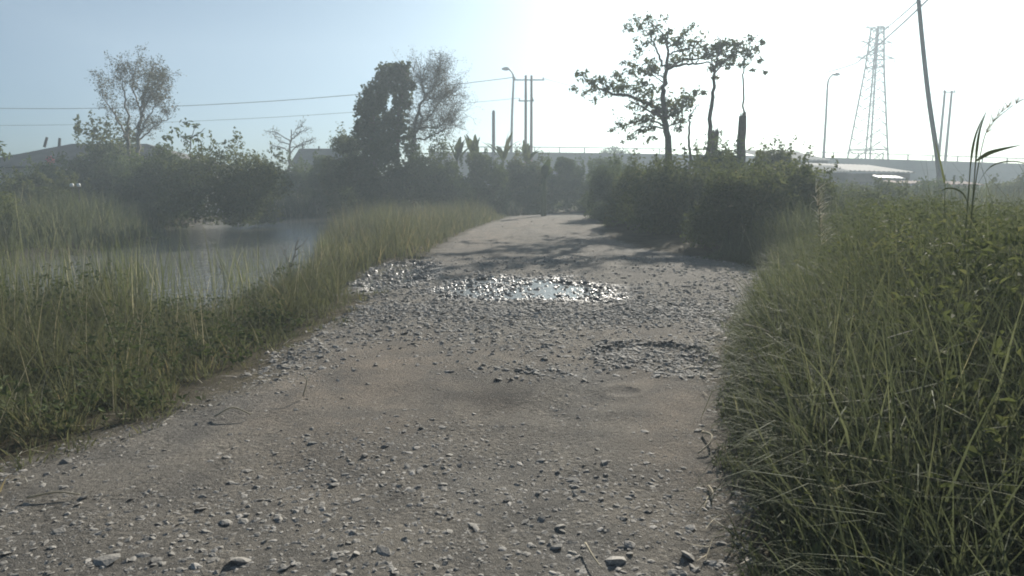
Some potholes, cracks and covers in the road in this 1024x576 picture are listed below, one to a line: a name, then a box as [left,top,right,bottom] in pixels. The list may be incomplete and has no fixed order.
pothole [342,259,435,292]
pothole [431,275,626,302]
pothole [605,385,642,397]
pothole [583,339,723,377]
